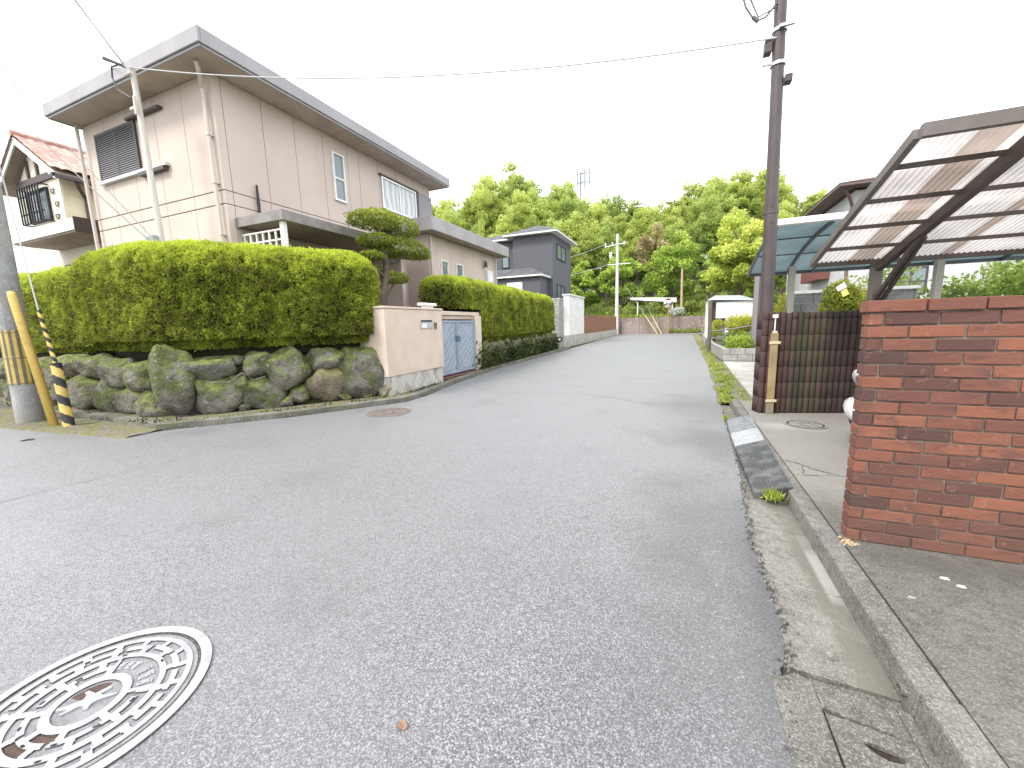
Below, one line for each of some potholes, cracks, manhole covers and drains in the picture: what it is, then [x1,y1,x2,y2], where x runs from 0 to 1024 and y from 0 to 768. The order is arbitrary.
manhole cover [0,626,212,768]
manhole cover [366,407,412,417]
manhole cover [783,420,828,429]
crack [786,460,846,477]
